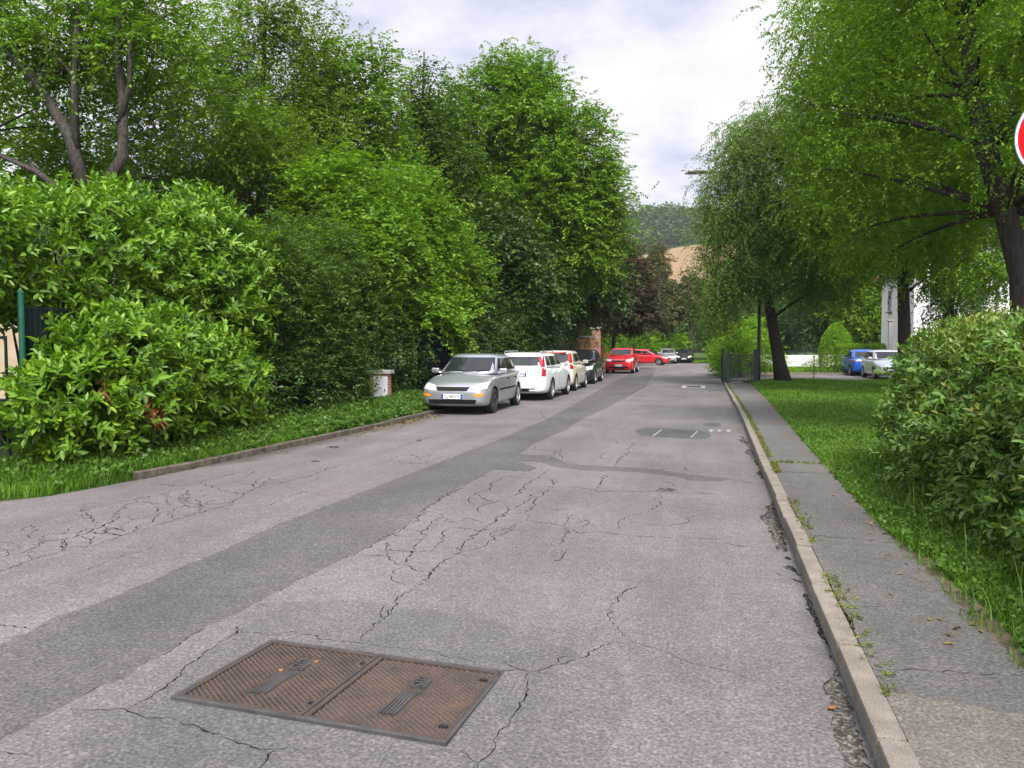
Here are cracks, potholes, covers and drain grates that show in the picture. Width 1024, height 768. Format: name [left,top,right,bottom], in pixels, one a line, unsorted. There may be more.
crack [0,464,348,575]
manhole cover [171,639,505,747]
crack [499,436,760,540]
crack [75,471,750,768]
pothole [760,501,788,552]
pothole [803,593,829,648]
pothole [823,655,871,768]
